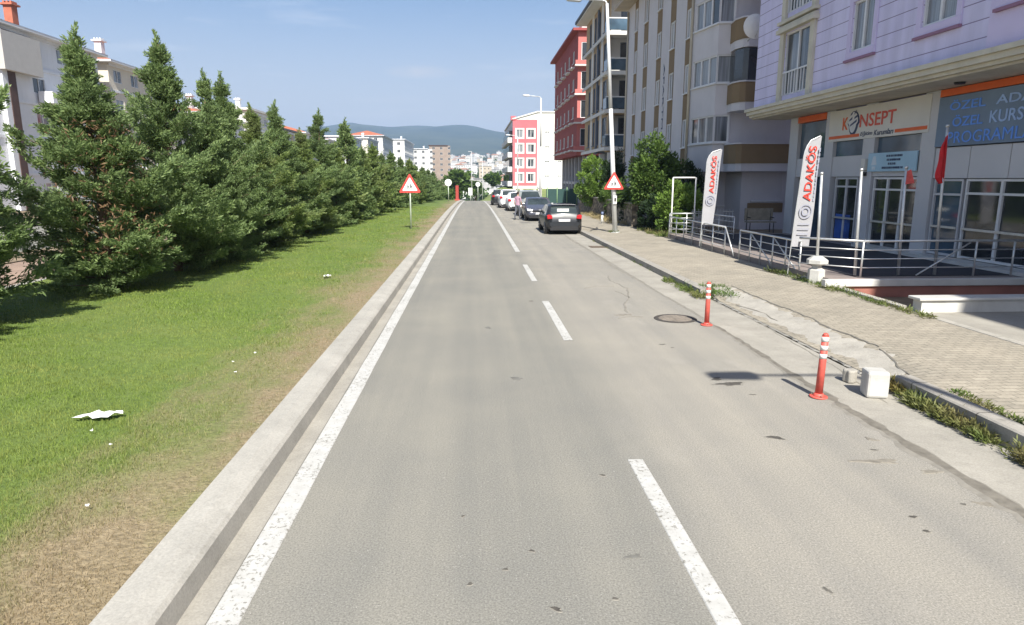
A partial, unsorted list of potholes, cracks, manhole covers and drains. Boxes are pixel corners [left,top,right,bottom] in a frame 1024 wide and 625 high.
crack [588,276,640,318]
manhole cover [654,314,697,323]
